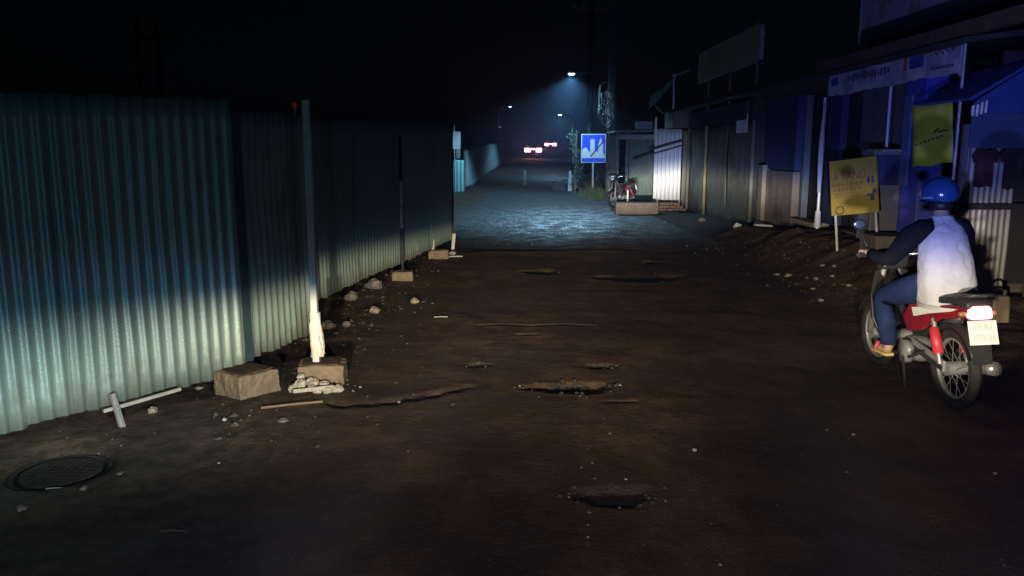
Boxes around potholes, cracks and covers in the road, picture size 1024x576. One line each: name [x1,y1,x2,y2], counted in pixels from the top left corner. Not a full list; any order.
pothole [513,379,623,394]
pothole [558,485,664,509]
manhole cover [5,455,114,491]
pothole [597,273,693,282]
